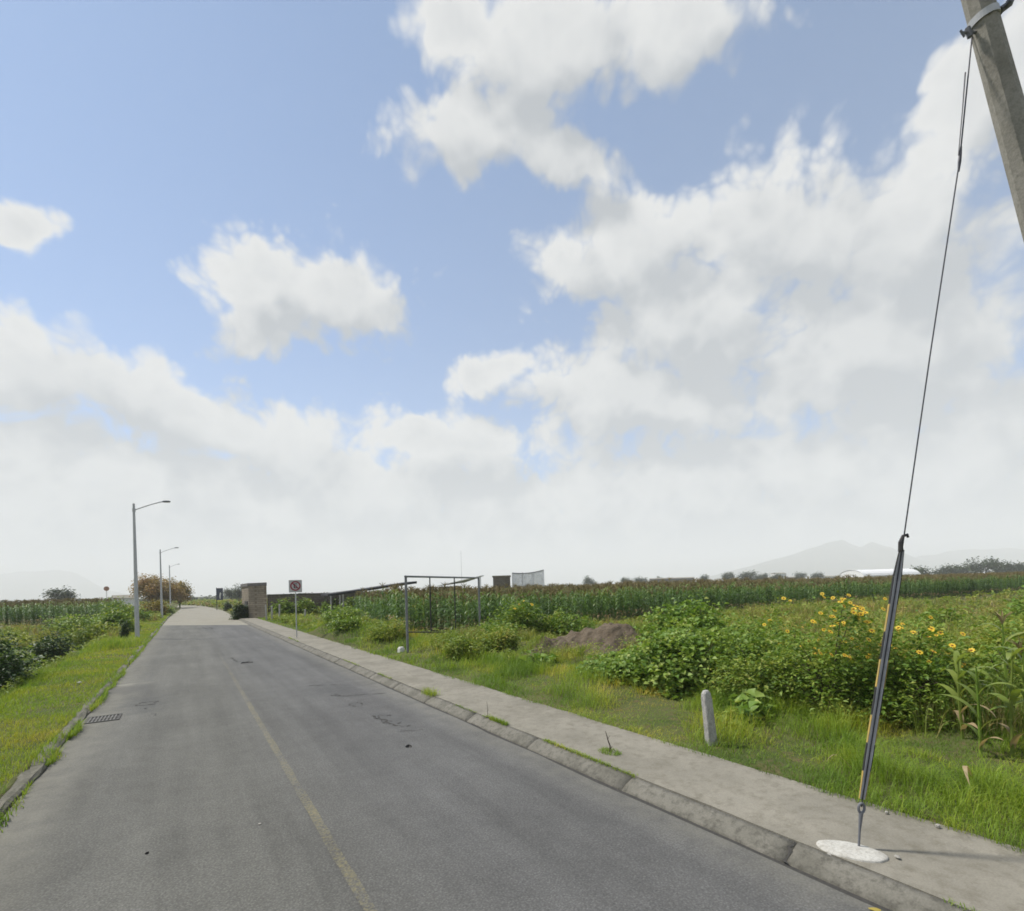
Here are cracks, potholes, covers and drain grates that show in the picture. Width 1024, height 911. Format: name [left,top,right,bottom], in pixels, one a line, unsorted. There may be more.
drain grate [84,713,122,724]
